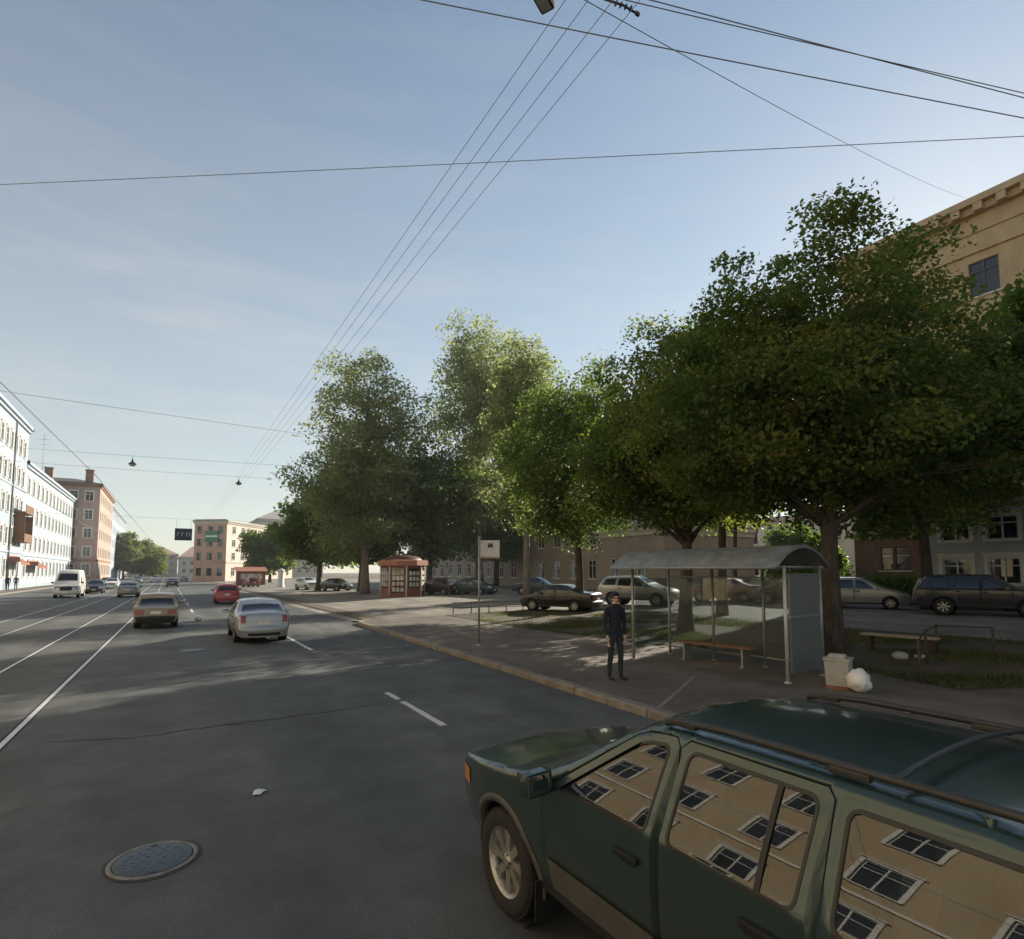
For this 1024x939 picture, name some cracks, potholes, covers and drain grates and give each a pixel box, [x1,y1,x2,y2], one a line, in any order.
manhole cover [101,840,203,882]
crack [47,704,375,743]
